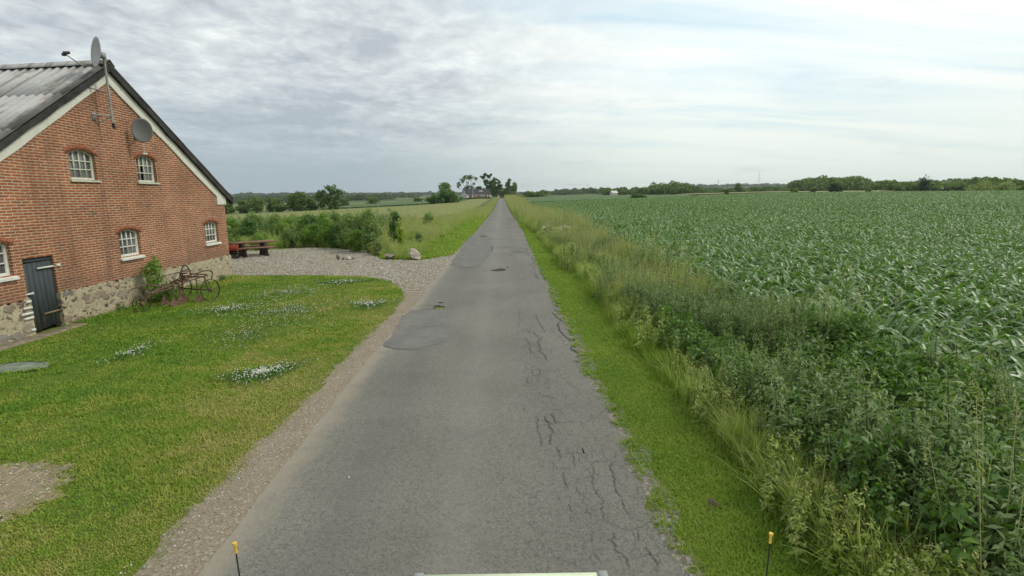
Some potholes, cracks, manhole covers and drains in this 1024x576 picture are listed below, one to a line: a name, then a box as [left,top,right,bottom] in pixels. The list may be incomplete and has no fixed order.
crack [519,310,671,569]
